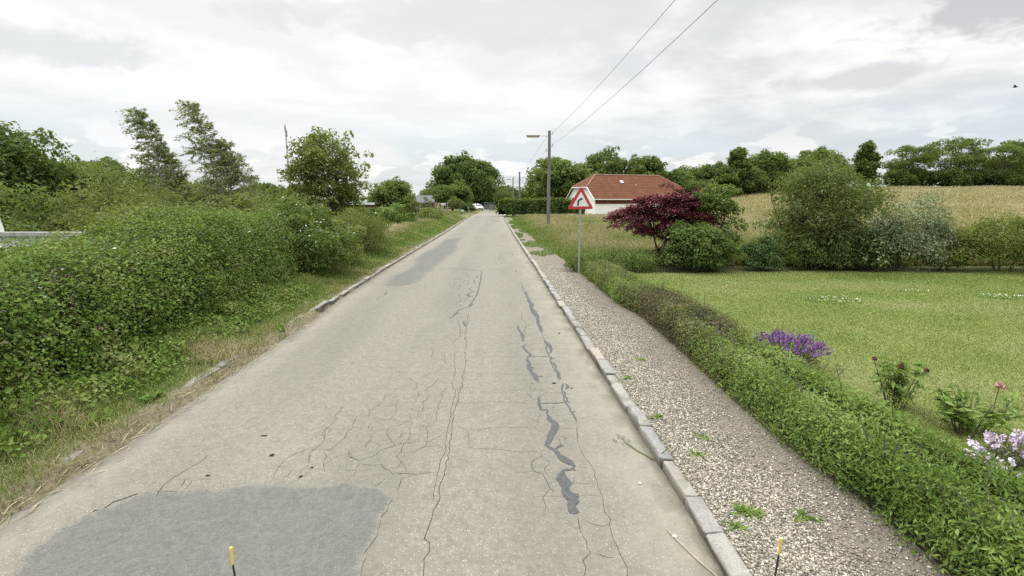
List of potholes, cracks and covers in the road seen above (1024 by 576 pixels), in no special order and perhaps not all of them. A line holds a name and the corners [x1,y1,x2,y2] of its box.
crack [273,273,628,576]
crack [89,456,224,514]
